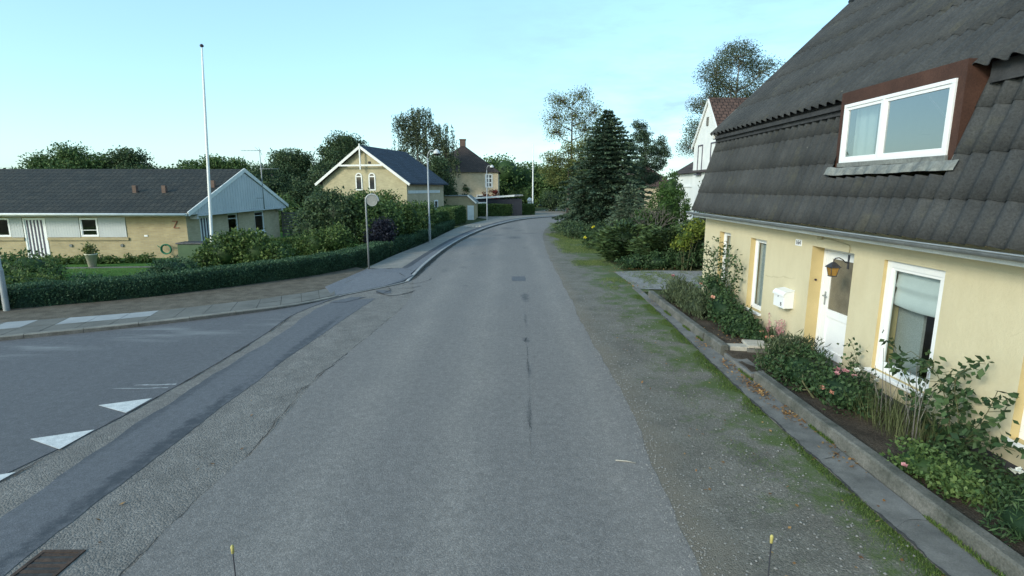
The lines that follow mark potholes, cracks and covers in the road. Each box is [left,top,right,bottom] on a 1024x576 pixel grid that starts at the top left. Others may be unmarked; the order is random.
crack [119,309,400,576]
drain grate [10,549,86,576]
